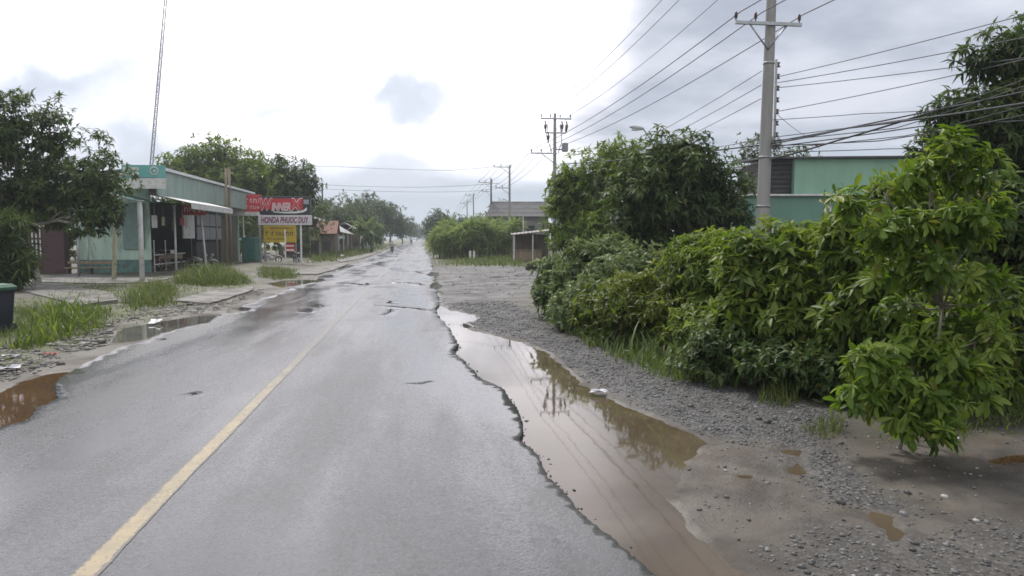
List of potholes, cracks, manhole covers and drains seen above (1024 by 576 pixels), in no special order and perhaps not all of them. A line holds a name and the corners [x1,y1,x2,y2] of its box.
pothole [435,290,765,576]
pothole [0,368,76,427]
